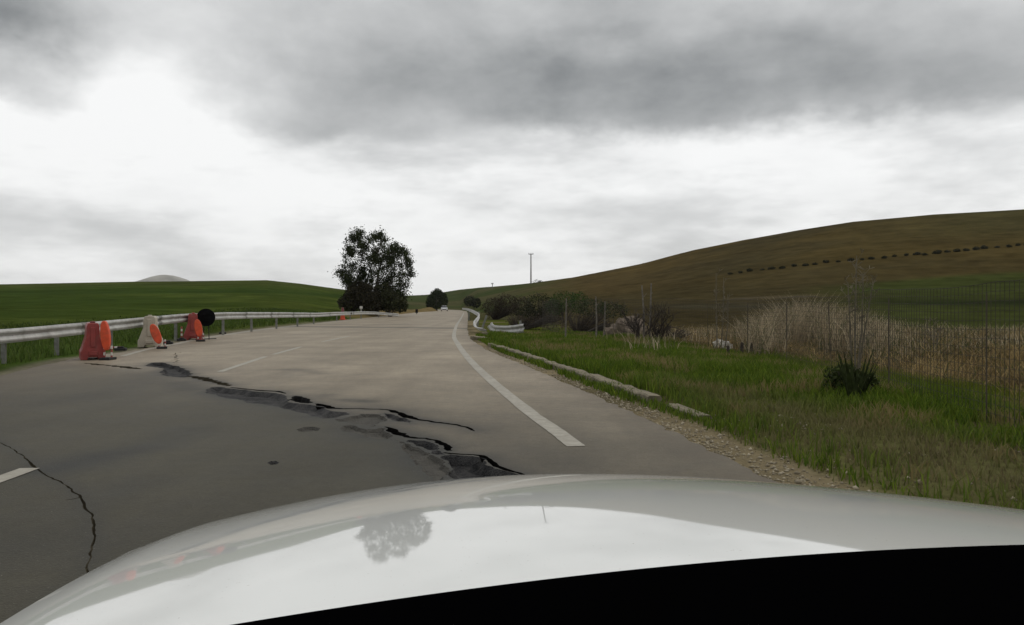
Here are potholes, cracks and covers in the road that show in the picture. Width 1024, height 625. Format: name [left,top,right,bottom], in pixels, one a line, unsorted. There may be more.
pothole [440,455,518,479]
pothole [205,387,350,418]
crack [1,443,96,573]
pothole [396,440,452,481]
pothole [145,363,193,377]
